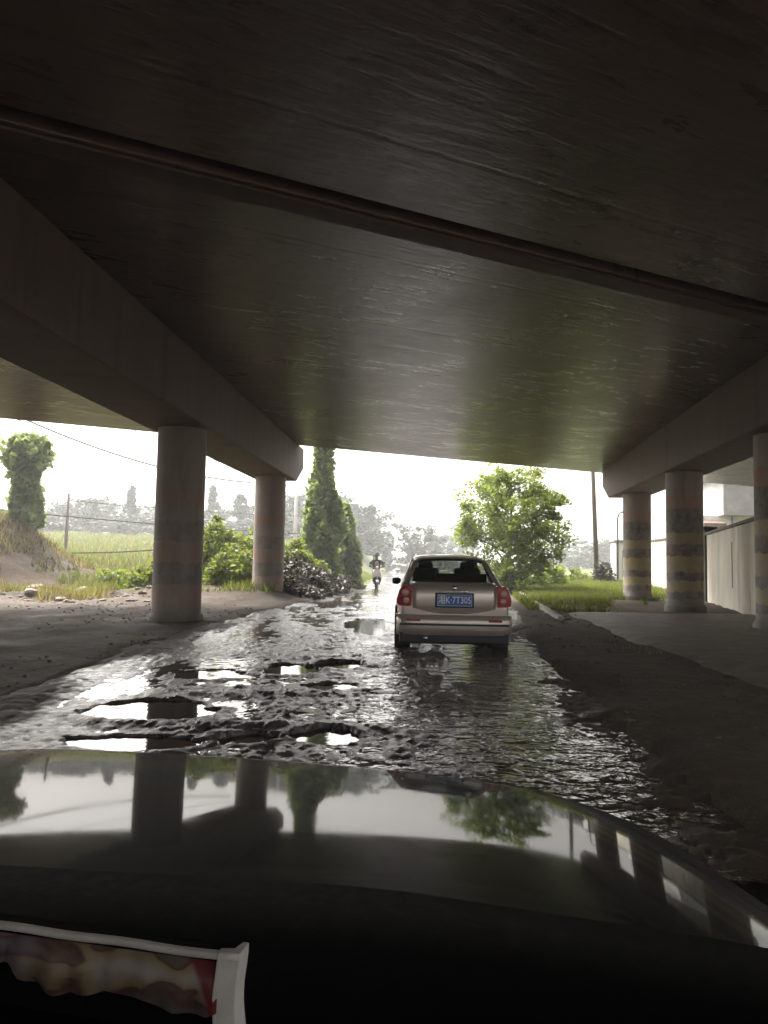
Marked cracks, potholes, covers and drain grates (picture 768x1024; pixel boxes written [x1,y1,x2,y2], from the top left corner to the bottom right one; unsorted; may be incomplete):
pothole [260,662,325,675]
pothole [284,722,363,745]
pothole [341,618,395,636]
pothole [311,658,367,670]
pothole [172,669,247,679]
pothole [56,733,209,751]
pothole [299,681,360,691]
pothole [72,695,222,720]
